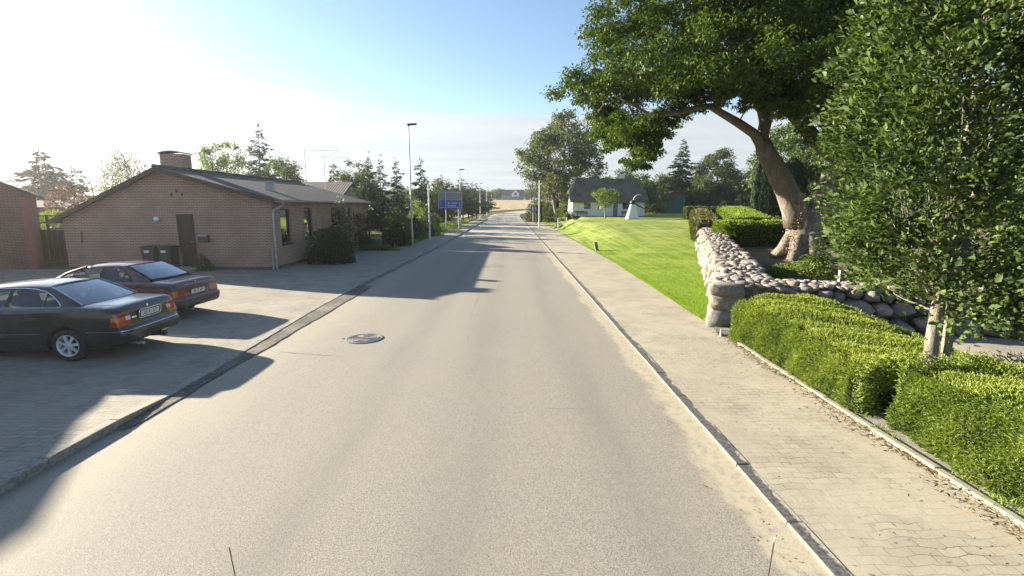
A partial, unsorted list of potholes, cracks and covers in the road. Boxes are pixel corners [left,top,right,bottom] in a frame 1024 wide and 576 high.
manhole cover [342,333,384,344]
